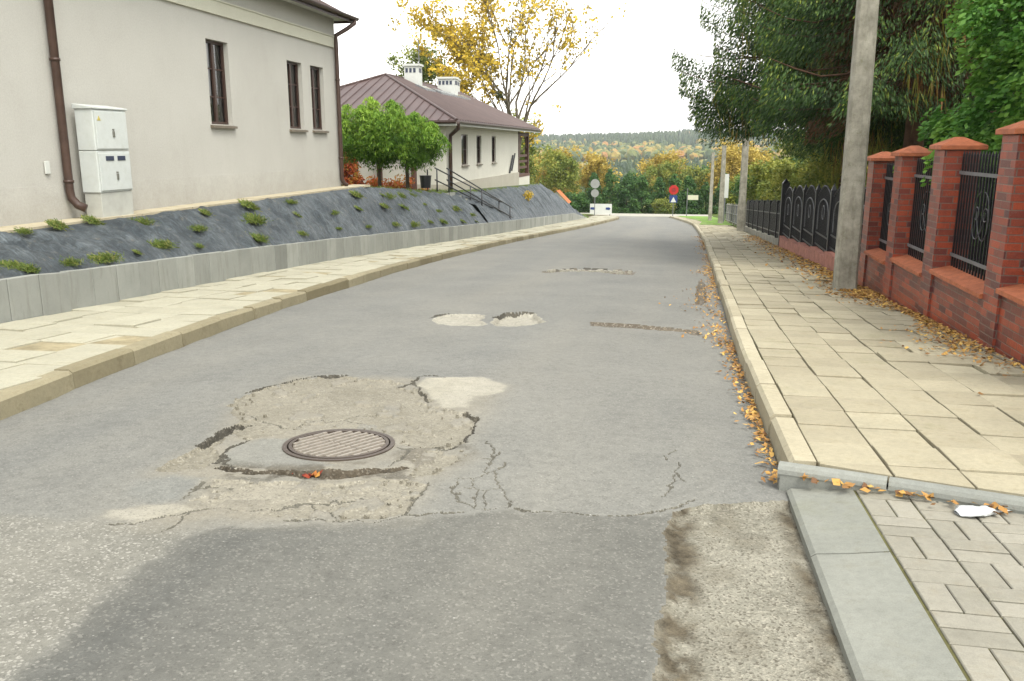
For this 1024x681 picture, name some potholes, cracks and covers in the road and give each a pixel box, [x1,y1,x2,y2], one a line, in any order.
manhole cover [282,429,395,462]
pothole [432,314,487,326]
pothole [490,312,545,327]
crack [106,412,512,532]
crack [661,449,685,497]
